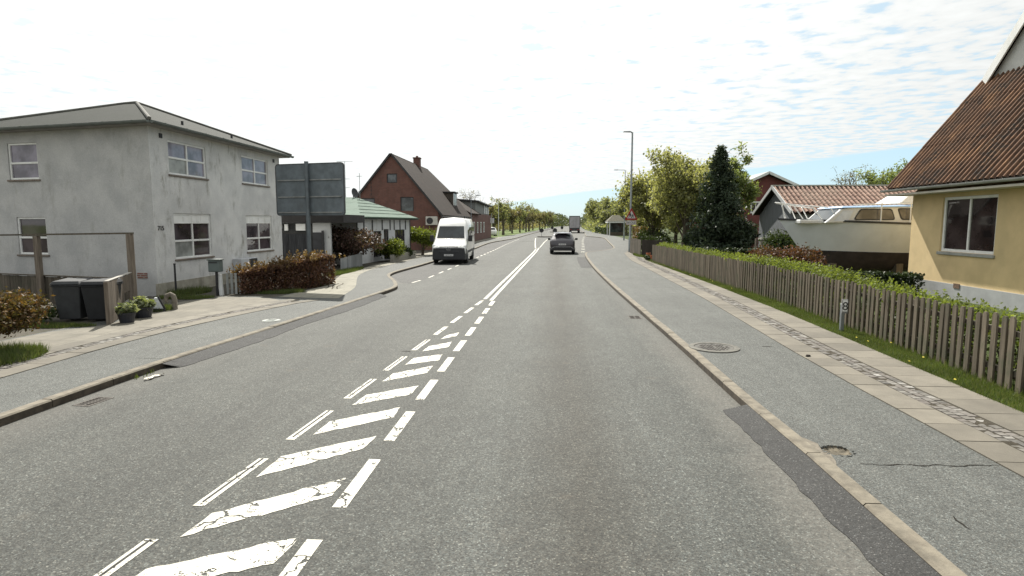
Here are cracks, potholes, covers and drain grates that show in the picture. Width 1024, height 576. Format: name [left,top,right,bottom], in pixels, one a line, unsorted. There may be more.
manhole cover [688,342,740,353]
pothole [819,444,856,457]
